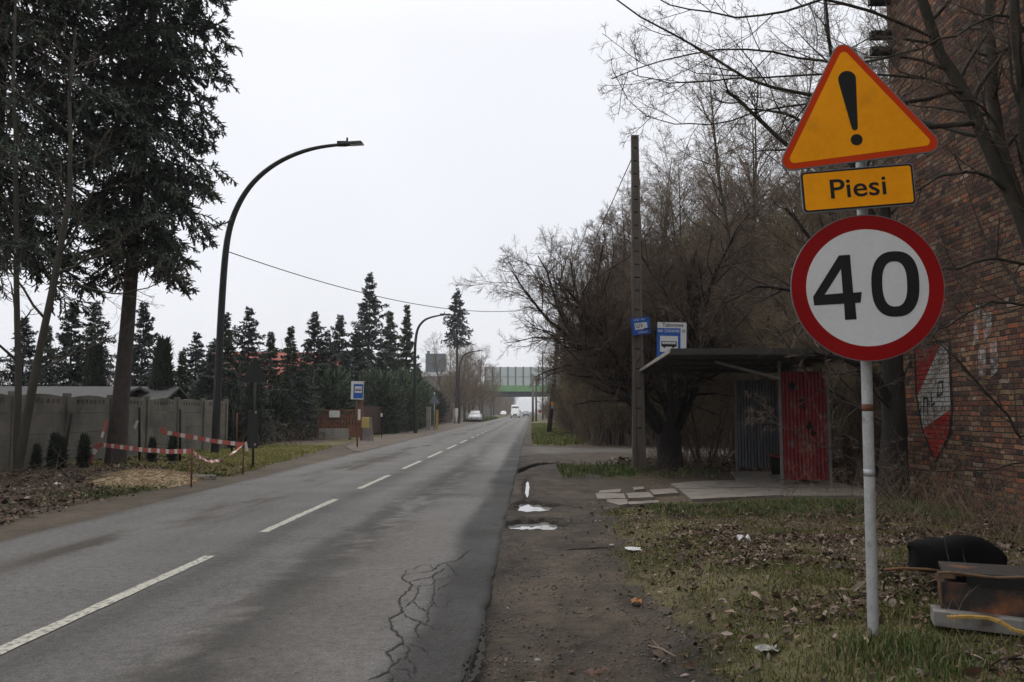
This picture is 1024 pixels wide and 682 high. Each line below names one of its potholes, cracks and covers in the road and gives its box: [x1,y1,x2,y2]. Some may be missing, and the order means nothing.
crack [517,461,560,474]
crack [369,549,471,681]
pothole [506,517,569,530]
pothole [510,501,561,510]
crack [457,620,486,682]
